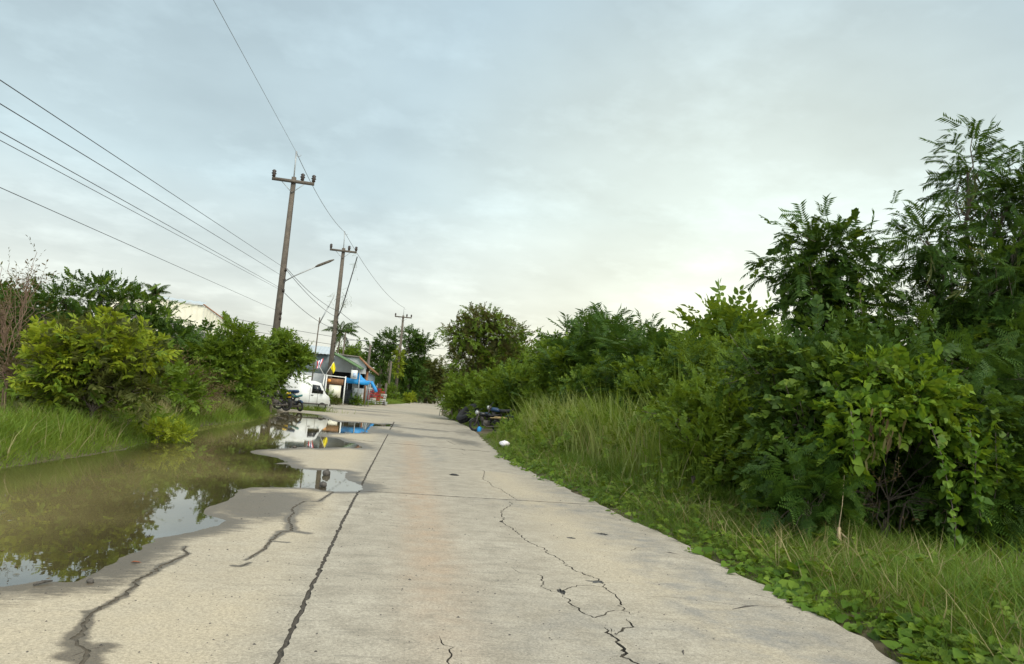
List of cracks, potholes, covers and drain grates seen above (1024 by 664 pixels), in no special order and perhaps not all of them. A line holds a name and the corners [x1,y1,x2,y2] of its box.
crack [70,546,189,664]
crack [482,470,639,664]
crack [242,492,334,566]
